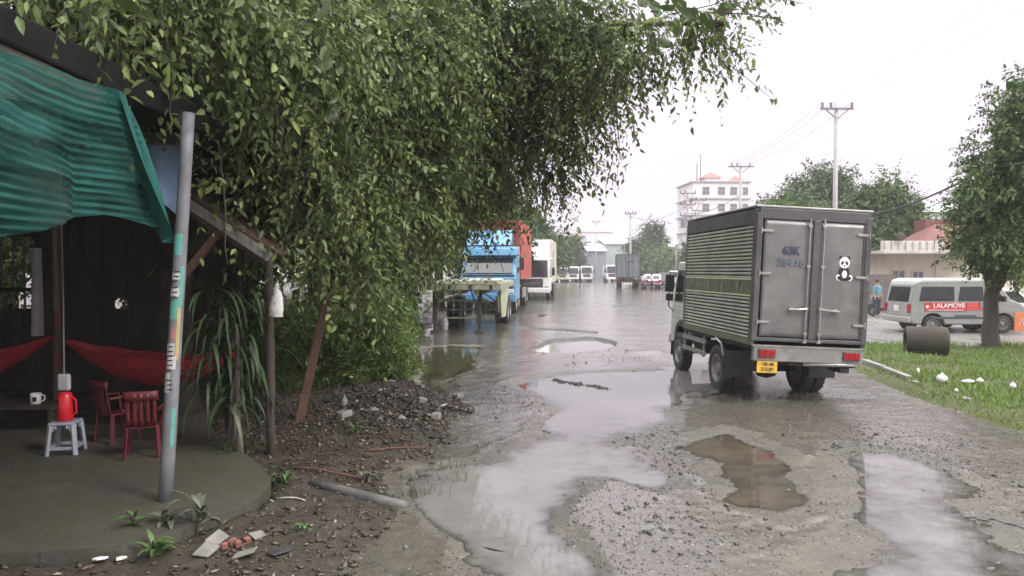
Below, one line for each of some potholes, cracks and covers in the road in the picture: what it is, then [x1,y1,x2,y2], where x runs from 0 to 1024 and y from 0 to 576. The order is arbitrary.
pothole [772,438,1024,576]
pothole [408,344,486,394]
pothole [654,424,855,526]
pothole [525,336,618,353]
